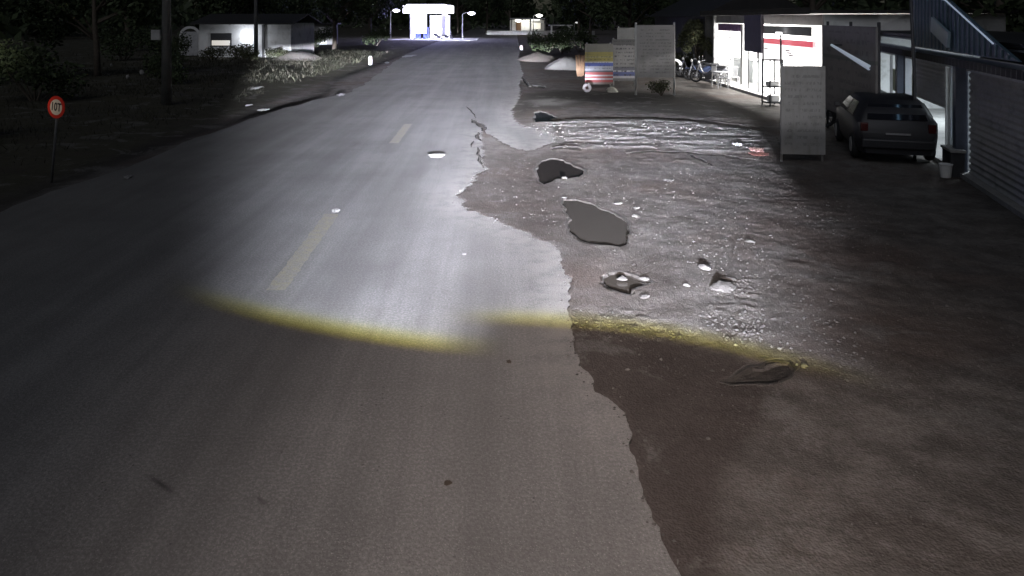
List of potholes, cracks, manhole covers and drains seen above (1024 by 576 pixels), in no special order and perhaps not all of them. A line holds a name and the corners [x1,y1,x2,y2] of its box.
pothole [717,359,799,387]
crack [467,107,487,167]
pothole [531,111,568,123]
pothole [560,199,634,248]
pothole [532,157,588,186]
pothole [601,270,656,297]
